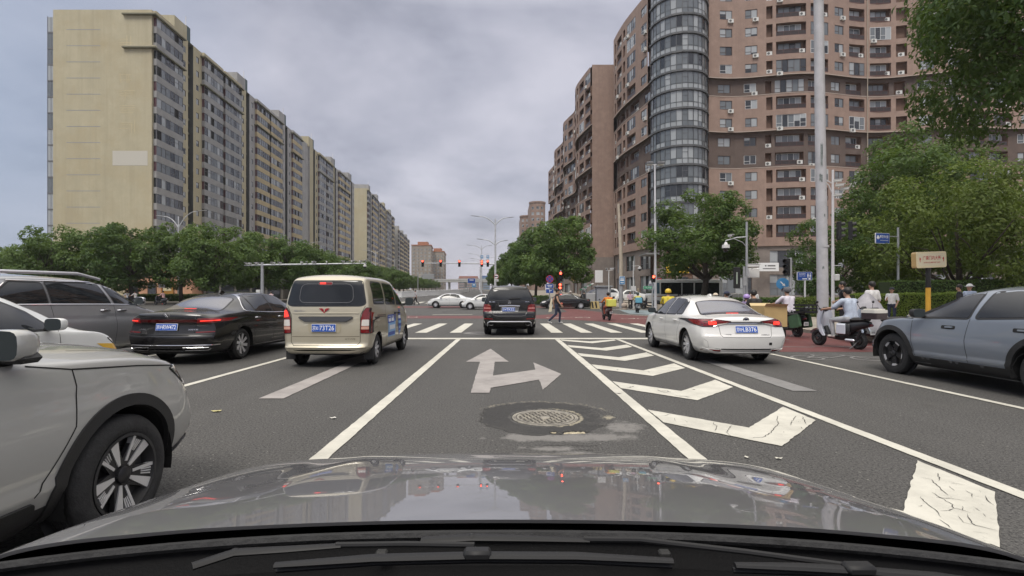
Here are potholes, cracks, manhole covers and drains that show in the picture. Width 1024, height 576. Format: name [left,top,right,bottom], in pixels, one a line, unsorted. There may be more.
crack [920,474,992,534]
manhole cover [512,410,578,427]
